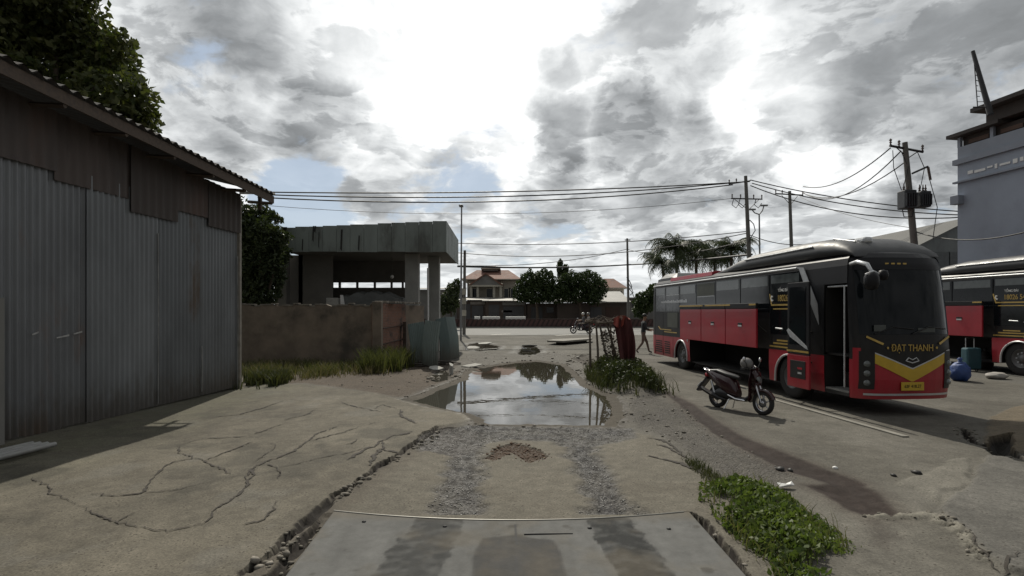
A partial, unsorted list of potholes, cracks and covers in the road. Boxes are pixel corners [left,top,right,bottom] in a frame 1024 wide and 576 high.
pothole [982,432,1019,457]
pothole [481,442,549,463]
crack [965,531,1019,574]
pothole [401,360,626,427]
crack [31,401,439,576]
